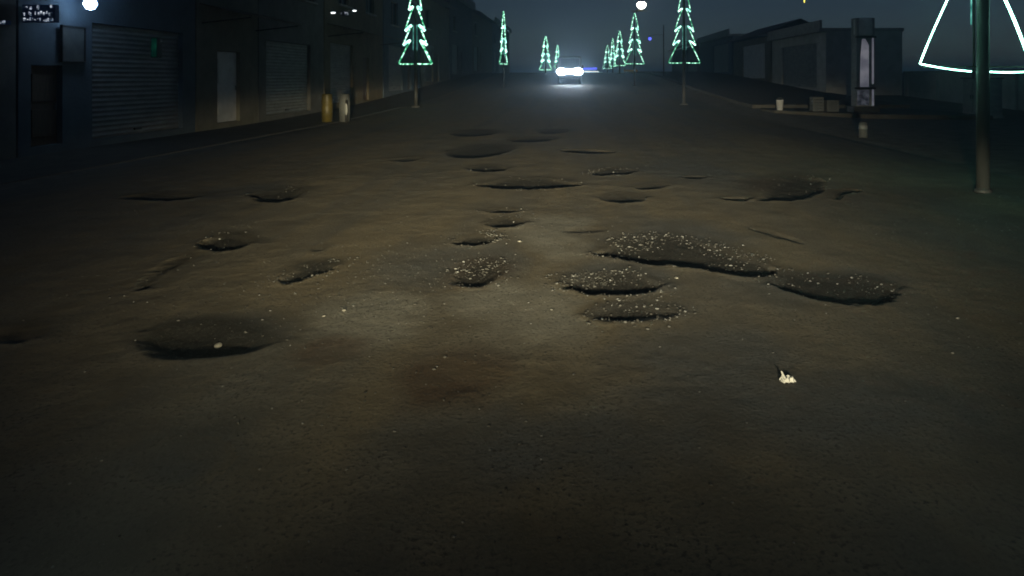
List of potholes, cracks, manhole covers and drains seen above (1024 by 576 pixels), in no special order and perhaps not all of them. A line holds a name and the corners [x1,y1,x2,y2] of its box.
pothole [483,215,528,228]
pothole [580,165,640,176]
pothole [440,229,516,249]
pothole [583,294,696,330]
pothole [176,231,262,254]
pothole [544,266,680,301]
pothole [245,186,310,203]
pothole [255,257,358,288]
pothole [753,268,913,306]
pothole [445,144,517,159]
pothole [117,191,210,201]
pothole [599,192,650,203]
